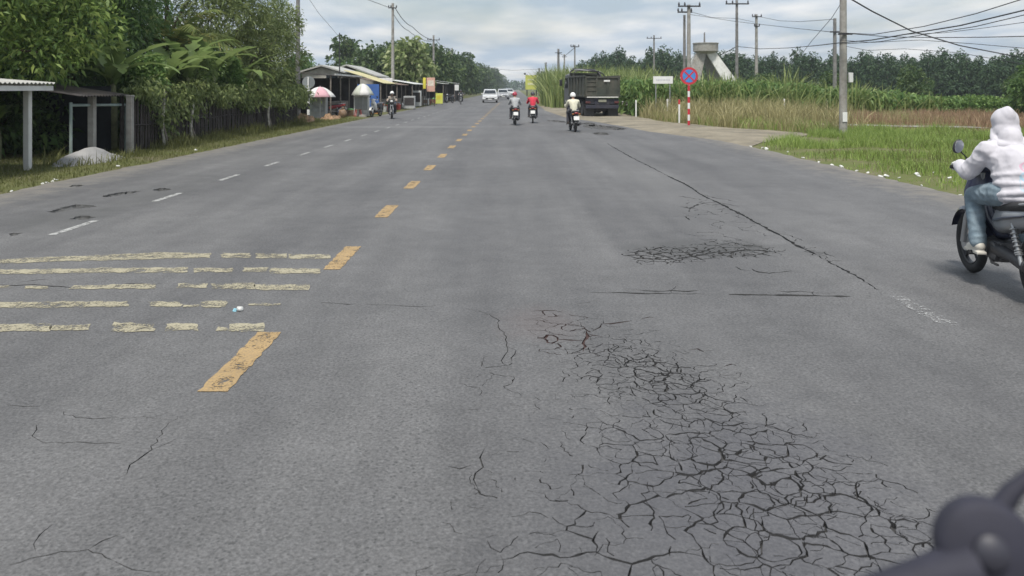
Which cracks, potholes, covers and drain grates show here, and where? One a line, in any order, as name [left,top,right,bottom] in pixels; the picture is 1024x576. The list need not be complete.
crack [416,310,934,576]
pothole [50,205,96,213]
crack [12,405,178,472]
crack [621,196,831,274]
crack [16,527,148,572]
